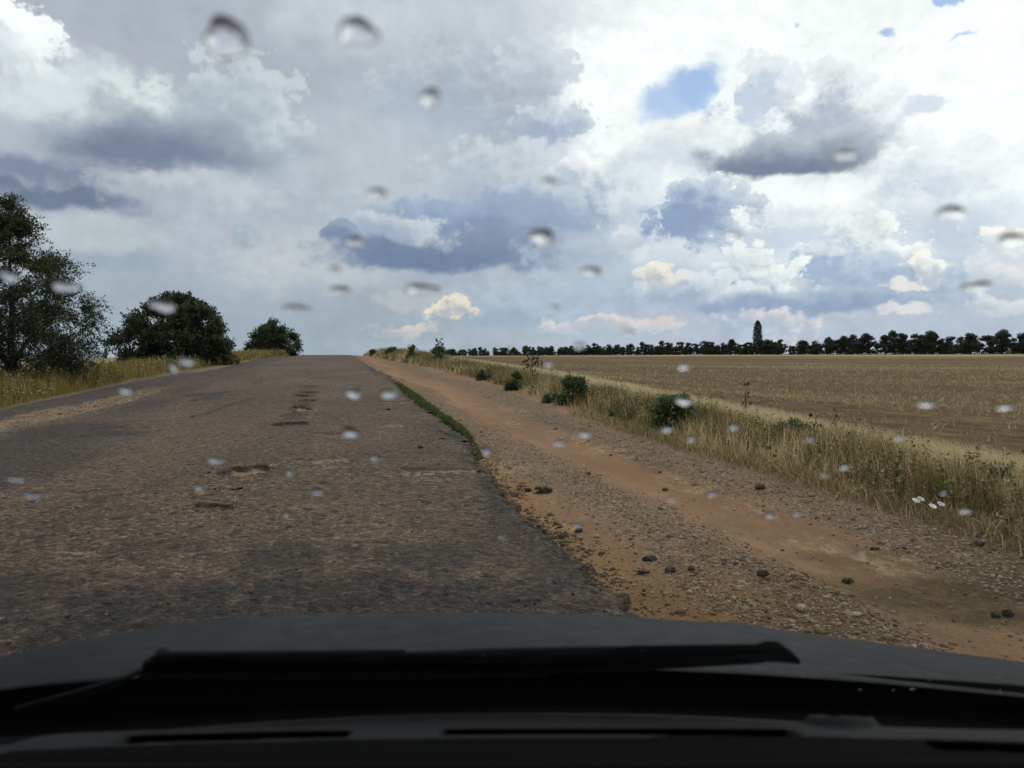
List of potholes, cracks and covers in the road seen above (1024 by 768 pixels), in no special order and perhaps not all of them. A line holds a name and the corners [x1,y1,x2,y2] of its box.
pothole [212,464,274,477]
pothole [185,502,238,513]
